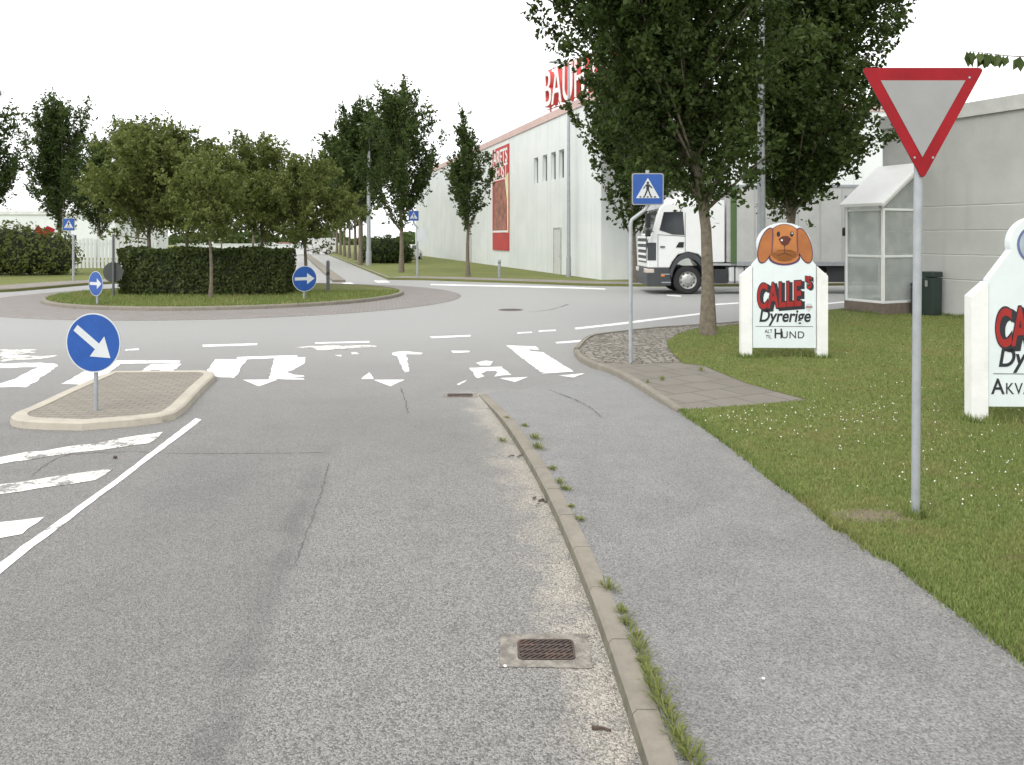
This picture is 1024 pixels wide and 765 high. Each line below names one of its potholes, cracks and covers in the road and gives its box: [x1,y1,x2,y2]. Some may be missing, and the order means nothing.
drain grate [498,633,596,668]
crack [33,452,329,562]
